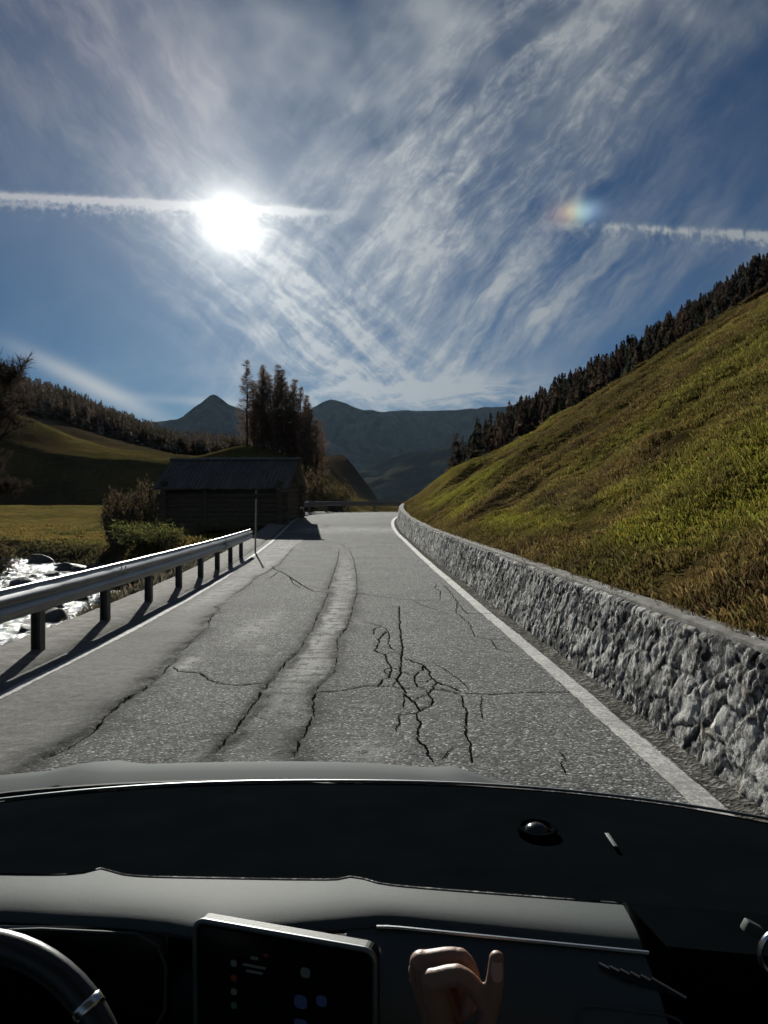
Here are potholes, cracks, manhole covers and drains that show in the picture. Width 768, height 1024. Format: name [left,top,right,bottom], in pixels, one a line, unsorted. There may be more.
crack [173,544,562,763]
